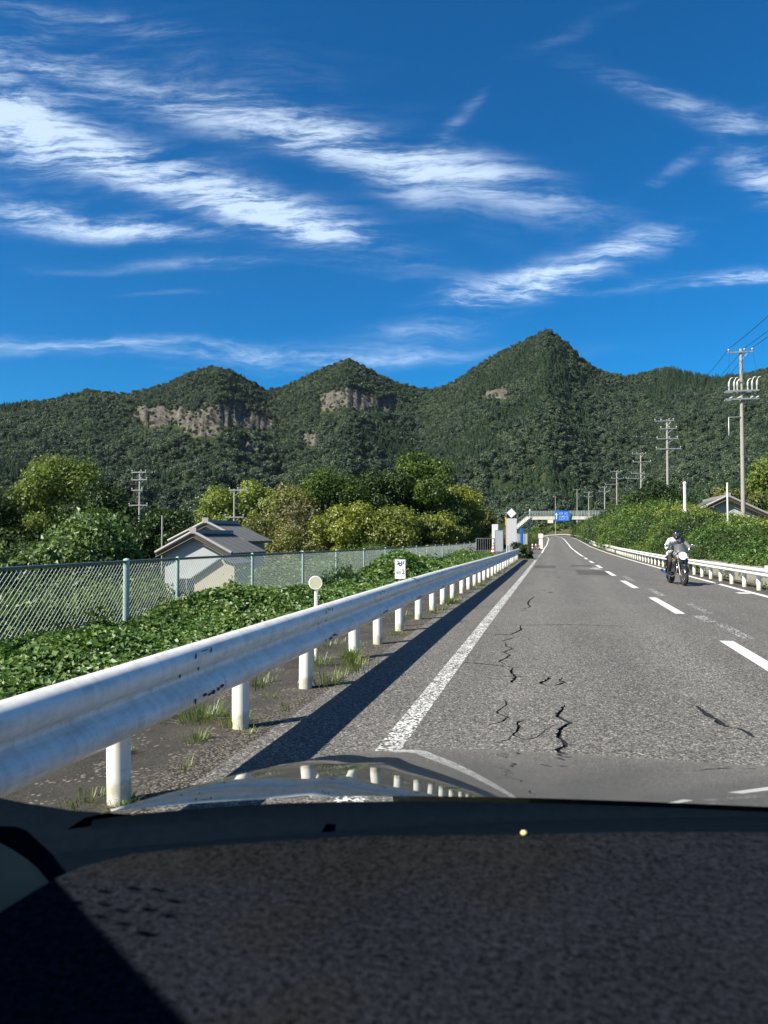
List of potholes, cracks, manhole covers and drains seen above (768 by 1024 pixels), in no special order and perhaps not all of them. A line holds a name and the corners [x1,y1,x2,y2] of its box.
crack [465,583,607,754]
